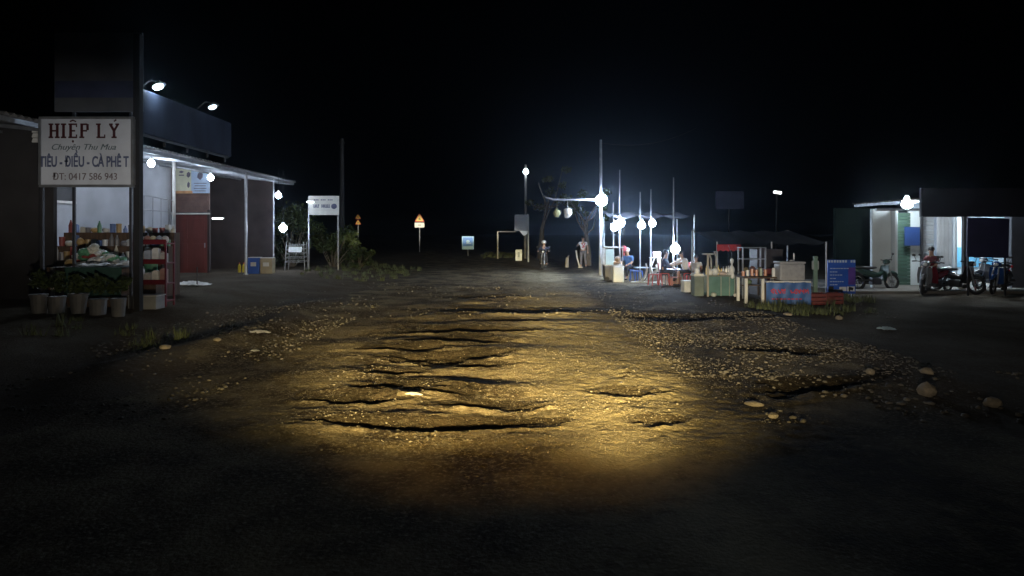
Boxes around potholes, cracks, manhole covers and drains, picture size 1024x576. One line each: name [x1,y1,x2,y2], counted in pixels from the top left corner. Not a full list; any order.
pothole [622,412,695,428]
pothole [582,384,667,398]
pothole [278,413,576,433]
pothole [746,369,909,402]
